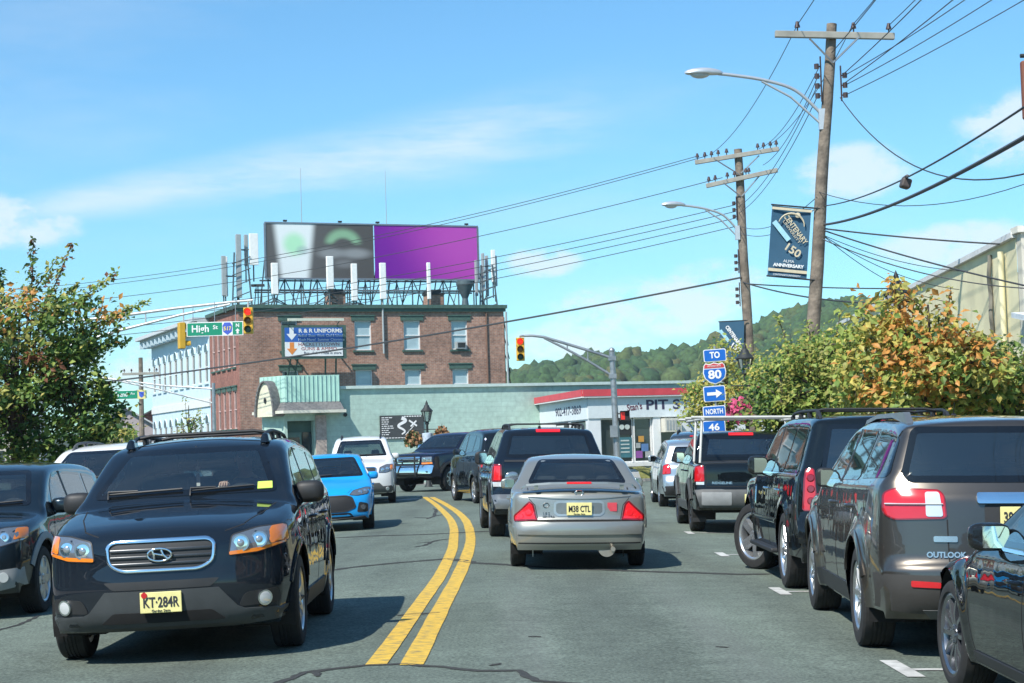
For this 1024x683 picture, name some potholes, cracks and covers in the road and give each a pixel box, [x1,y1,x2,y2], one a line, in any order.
crack [0,615,41,630]
crack [273,663,574,683]
crack [336,508,489,547]
